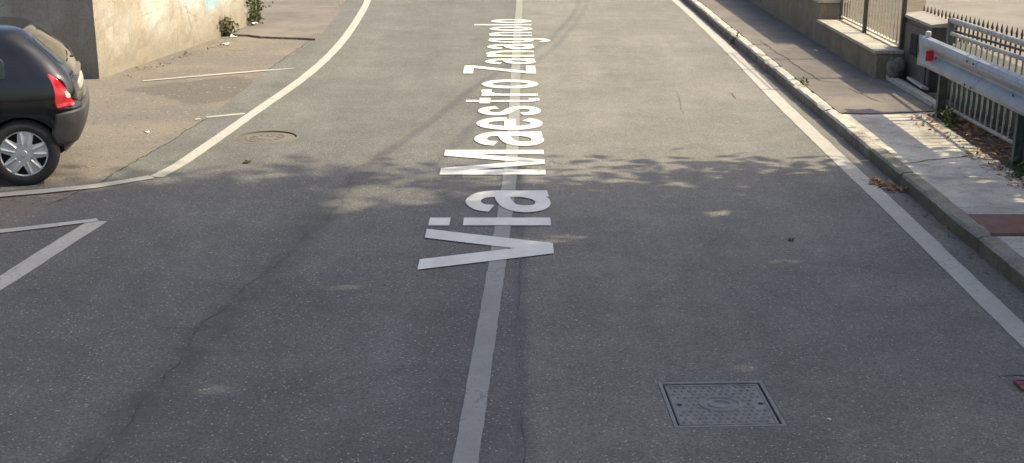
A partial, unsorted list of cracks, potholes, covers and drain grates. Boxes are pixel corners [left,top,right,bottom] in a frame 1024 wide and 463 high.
manhole cover [658,381,788,428]
crack [94,175,352,461]
manhole cover [233,130,299,144]
